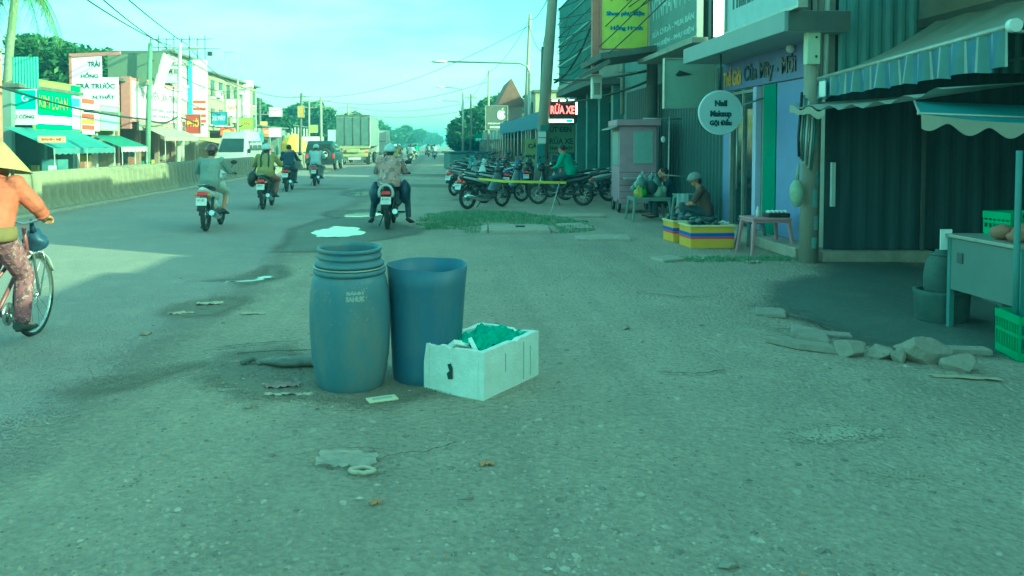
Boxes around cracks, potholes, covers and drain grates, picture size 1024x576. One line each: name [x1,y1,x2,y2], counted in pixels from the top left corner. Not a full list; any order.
pothole [266,217,428,253]
crack [293,442,454,460]
